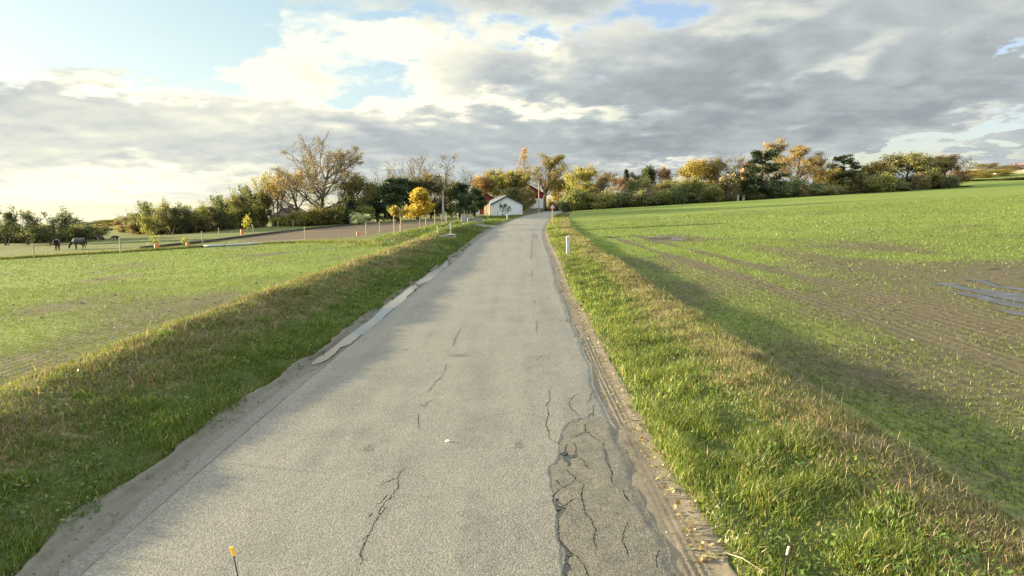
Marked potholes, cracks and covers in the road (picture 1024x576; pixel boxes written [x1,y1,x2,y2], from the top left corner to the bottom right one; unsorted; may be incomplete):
crack [356,469,404,571]
crack [545,390,659,576]
